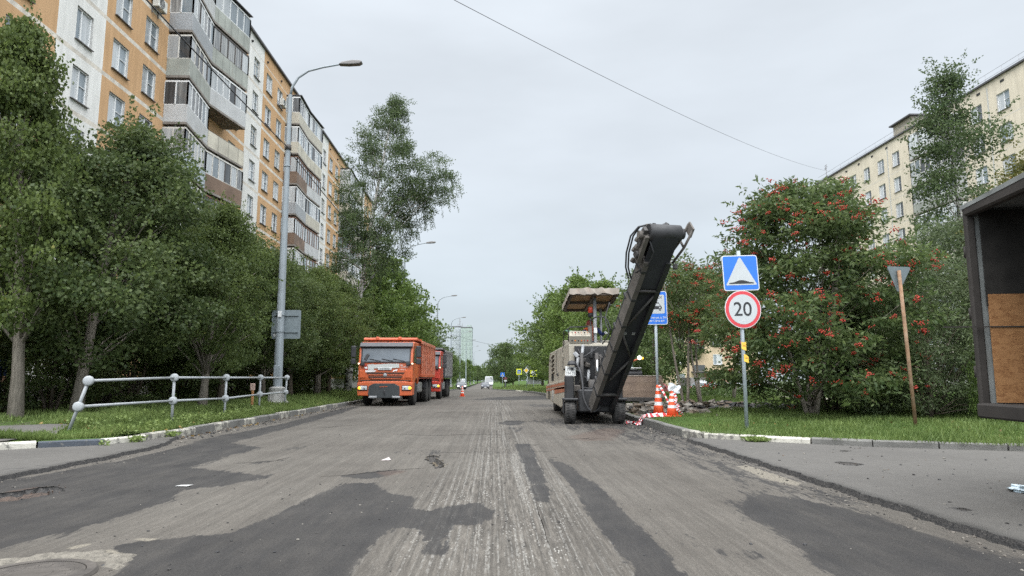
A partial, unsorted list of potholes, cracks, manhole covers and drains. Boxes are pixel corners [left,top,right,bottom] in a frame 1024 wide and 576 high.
pothole [424,455,448,469]
manhole cover [0,549,136,576]
pothole [0,485,66,502]
